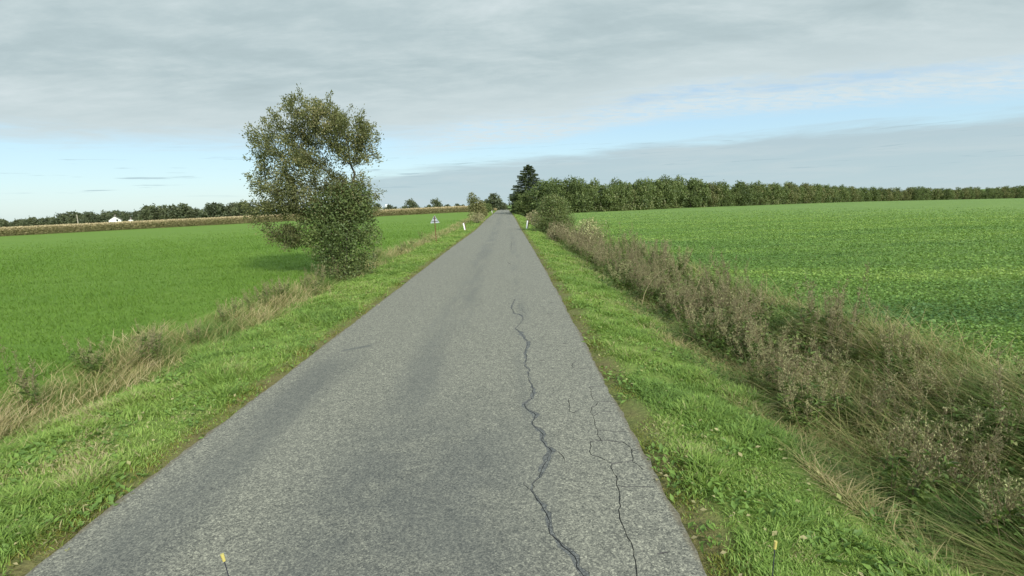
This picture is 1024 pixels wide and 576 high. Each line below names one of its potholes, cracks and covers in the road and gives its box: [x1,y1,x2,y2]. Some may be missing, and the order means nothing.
crack [510,299,654,576]
